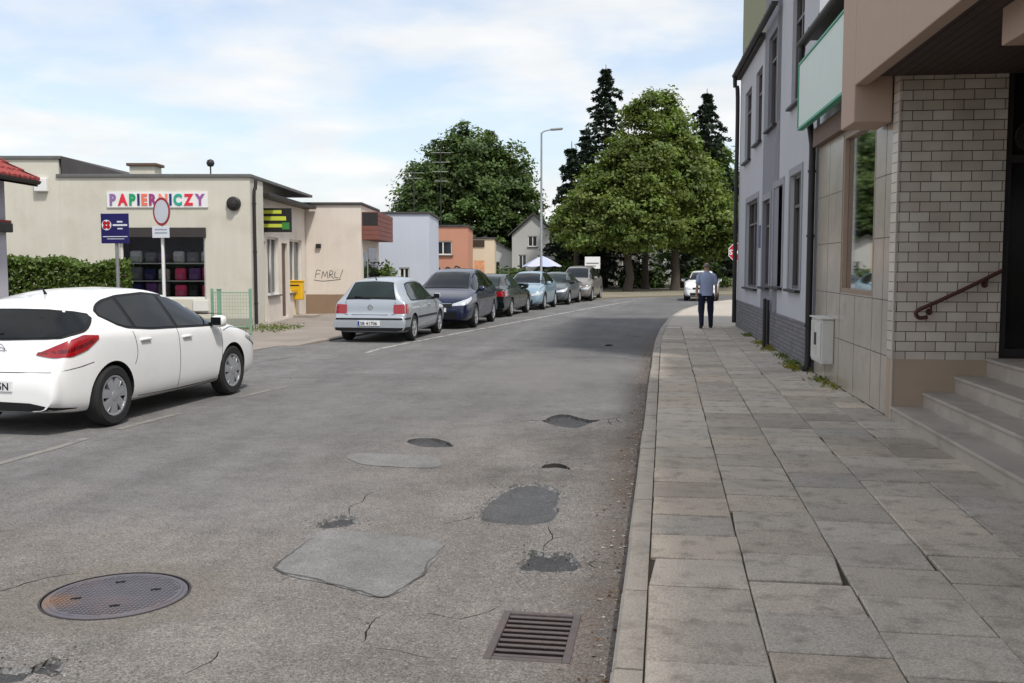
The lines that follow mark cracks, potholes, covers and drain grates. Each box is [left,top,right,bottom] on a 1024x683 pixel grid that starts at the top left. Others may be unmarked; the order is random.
pothole [407,438,453,447]
manhole cover [37,572,191,621]
crack [363,614,464,660]
drain grate [483,610,581,664]
pothole [518,550,581,572]
pothole [542,414,599,428]
crack [0,573,77,591]
pothole [314,515,359,529]
pothole [0,656,65,683]
